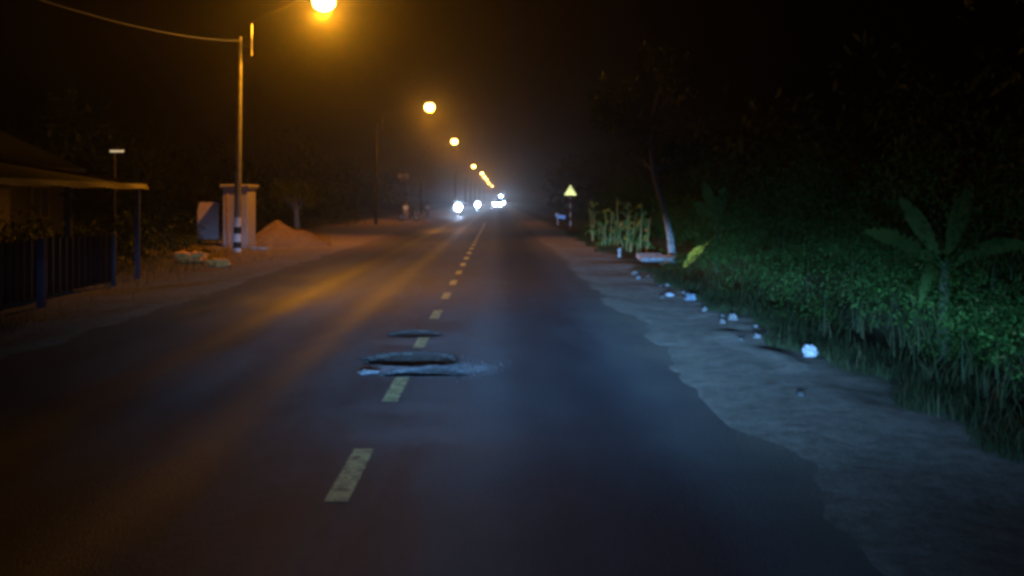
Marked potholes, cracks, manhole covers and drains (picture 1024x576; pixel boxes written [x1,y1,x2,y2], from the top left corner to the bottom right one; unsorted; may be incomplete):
pothole [387,330,445,338]
pothole [358,351,460,367]
pothole [376,367,472,377]
